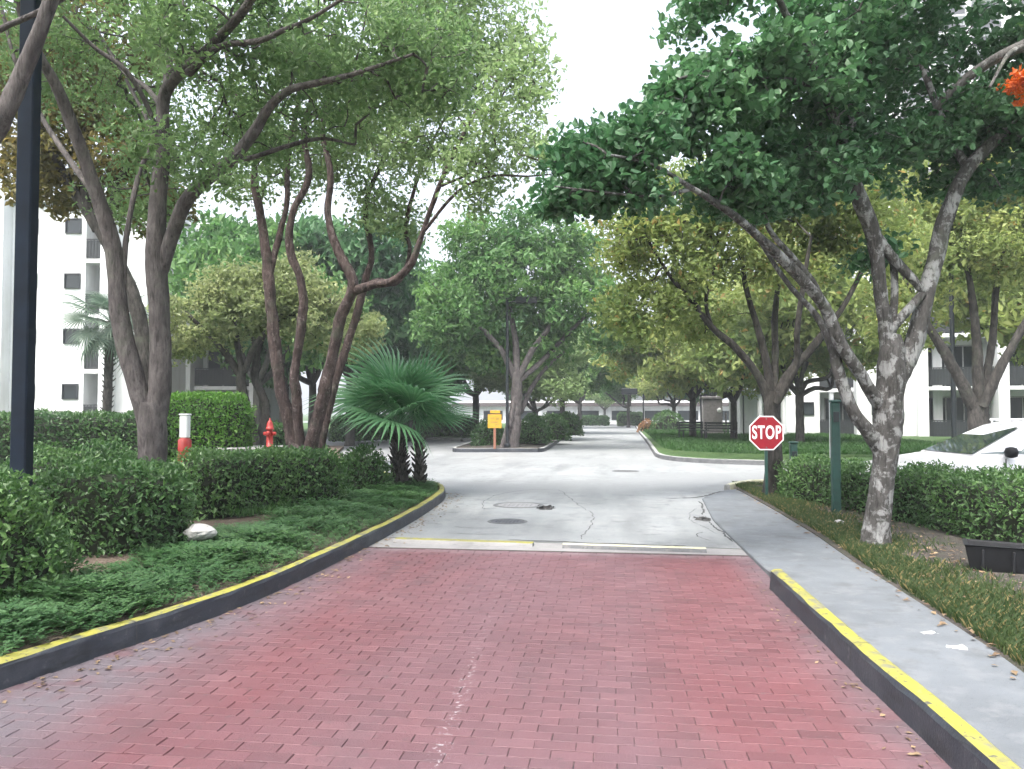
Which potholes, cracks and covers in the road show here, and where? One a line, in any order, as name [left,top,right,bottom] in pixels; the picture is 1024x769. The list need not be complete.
crack [482,489,733,546]
